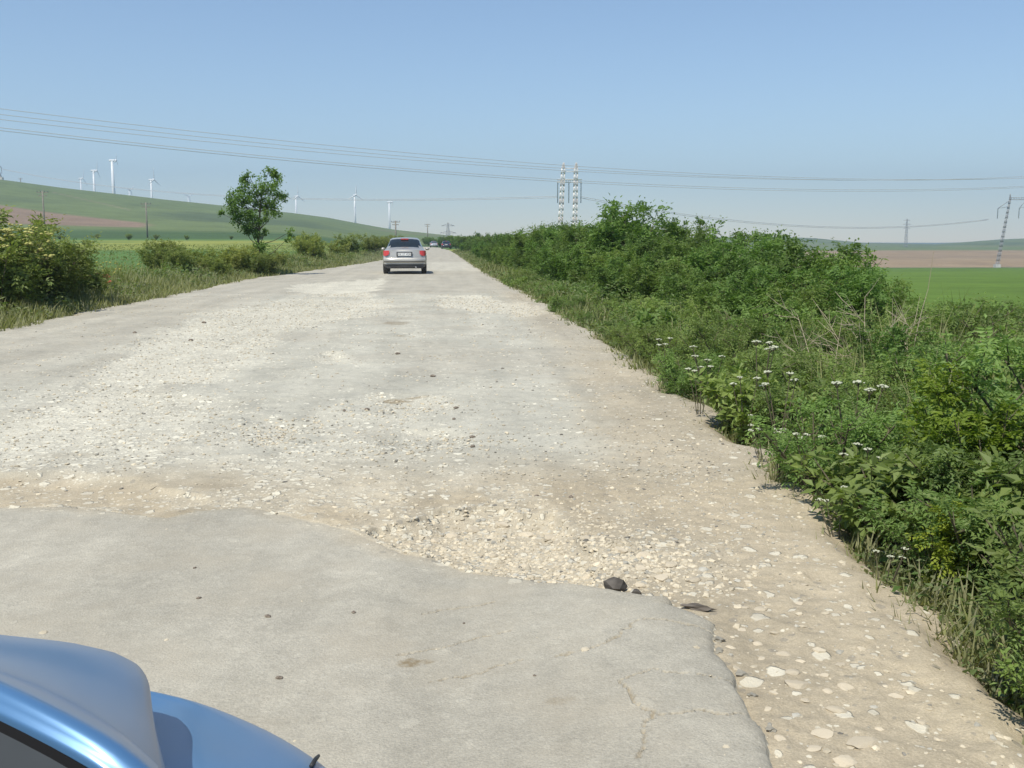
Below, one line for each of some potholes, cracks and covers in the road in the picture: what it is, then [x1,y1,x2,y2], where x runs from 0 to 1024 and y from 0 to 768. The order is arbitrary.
pothole [433,295,552,317]
pothole [365,506,609,585]
crack [395,601,525,683]
crack [551,617,746,760]
pothole [0,468,217,515]
